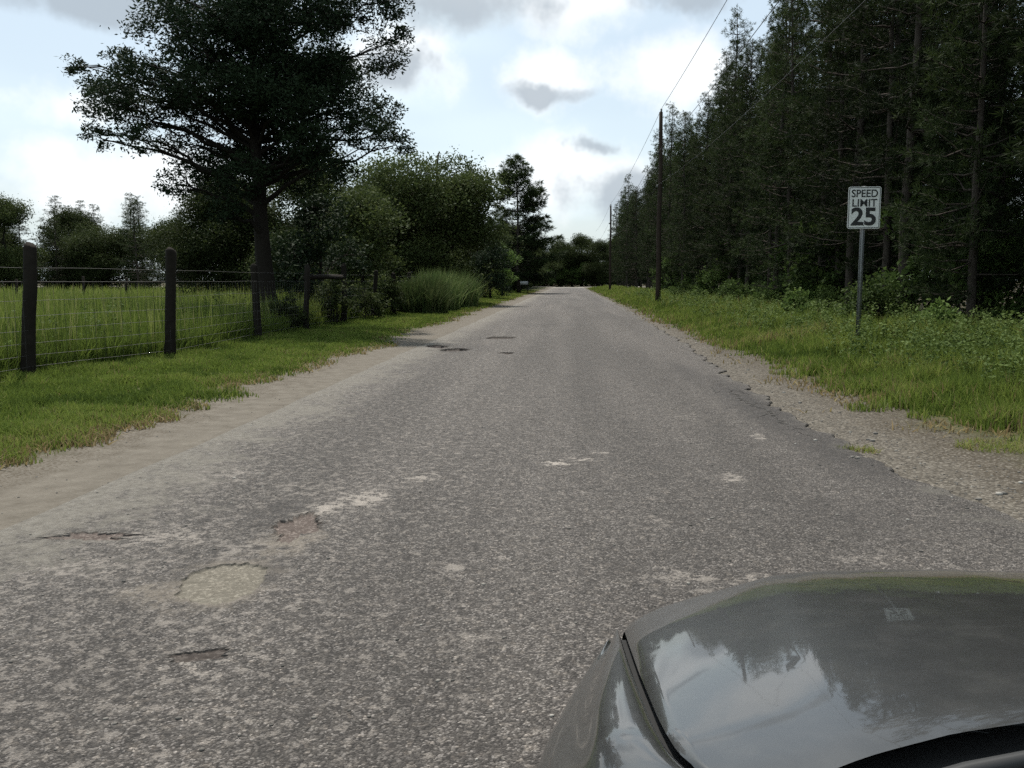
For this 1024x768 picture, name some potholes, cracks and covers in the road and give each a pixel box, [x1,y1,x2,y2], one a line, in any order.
pothole [174,562,269,605]
pothole [28,531,141,541]
pothole [270,511,325,544]
pothole [164,647,231,663]
